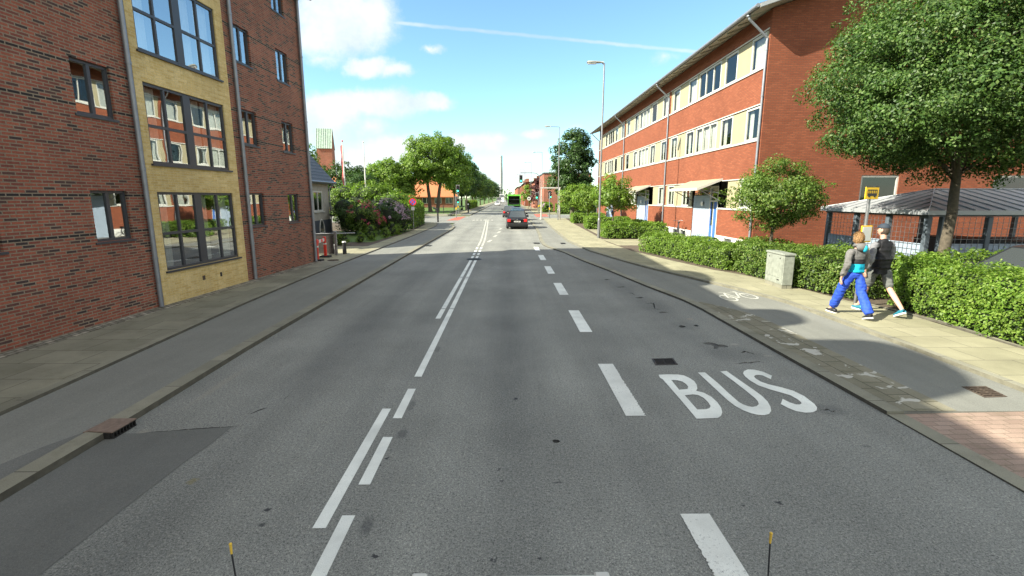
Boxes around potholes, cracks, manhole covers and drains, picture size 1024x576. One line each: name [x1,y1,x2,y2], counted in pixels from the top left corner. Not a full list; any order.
drain grate [83,418,137,439]
